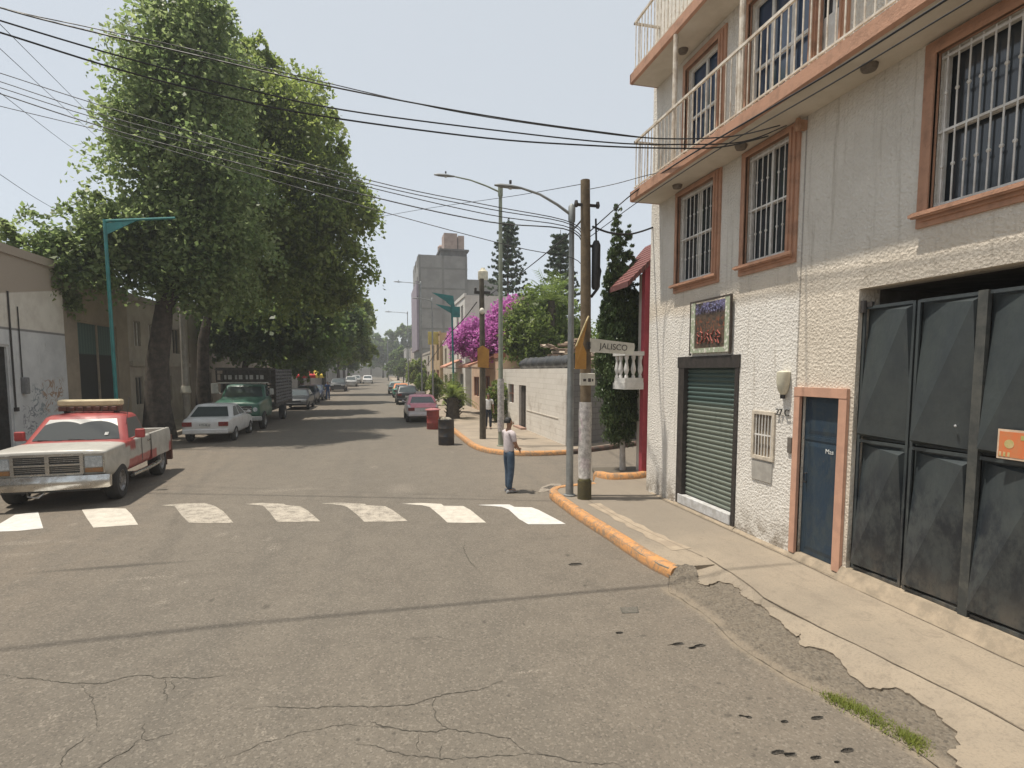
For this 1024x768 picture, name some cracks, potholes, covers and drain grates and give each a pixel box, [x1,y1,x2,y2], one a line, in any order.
crack [60,723,174,768]
crack [0,674,227,731]
pothole [770,749,797,757]
crack [208,677,619,765]
